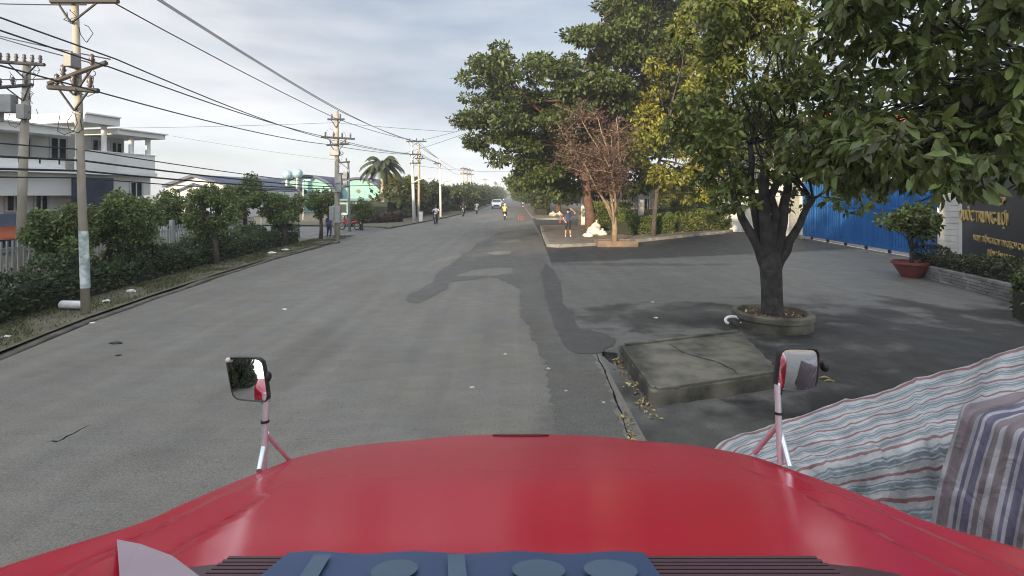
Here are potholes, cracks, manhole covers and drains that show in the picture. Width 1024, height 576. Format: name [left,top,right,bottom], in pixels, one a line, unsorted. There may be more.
crack [597,354,631,439]
